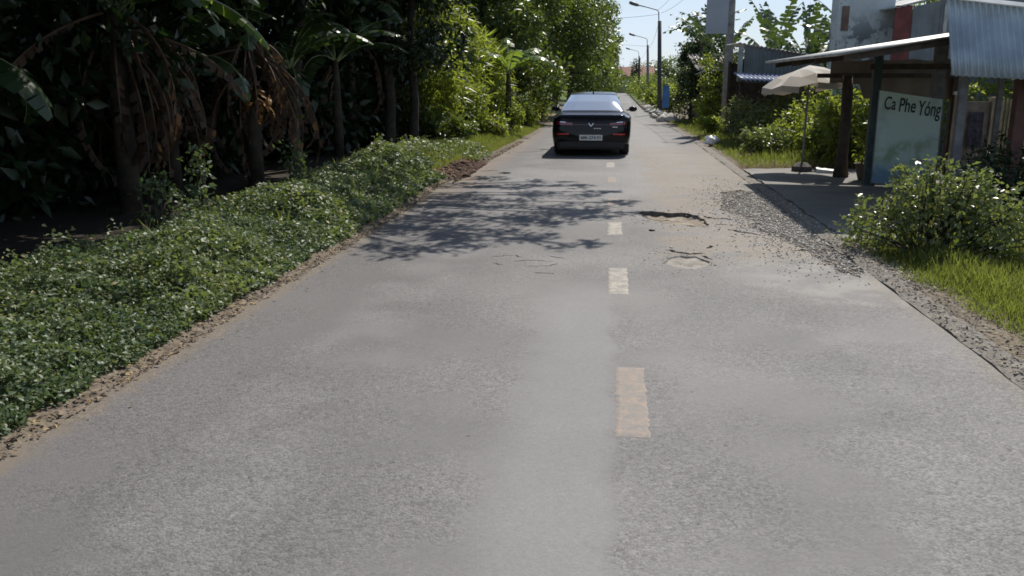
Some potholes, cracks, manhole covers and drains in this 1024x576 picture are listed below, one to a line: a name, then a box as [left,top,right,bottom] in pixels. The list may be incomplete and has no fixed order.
pothole [663,256,710,269]
pothole [638,211,709,227]
